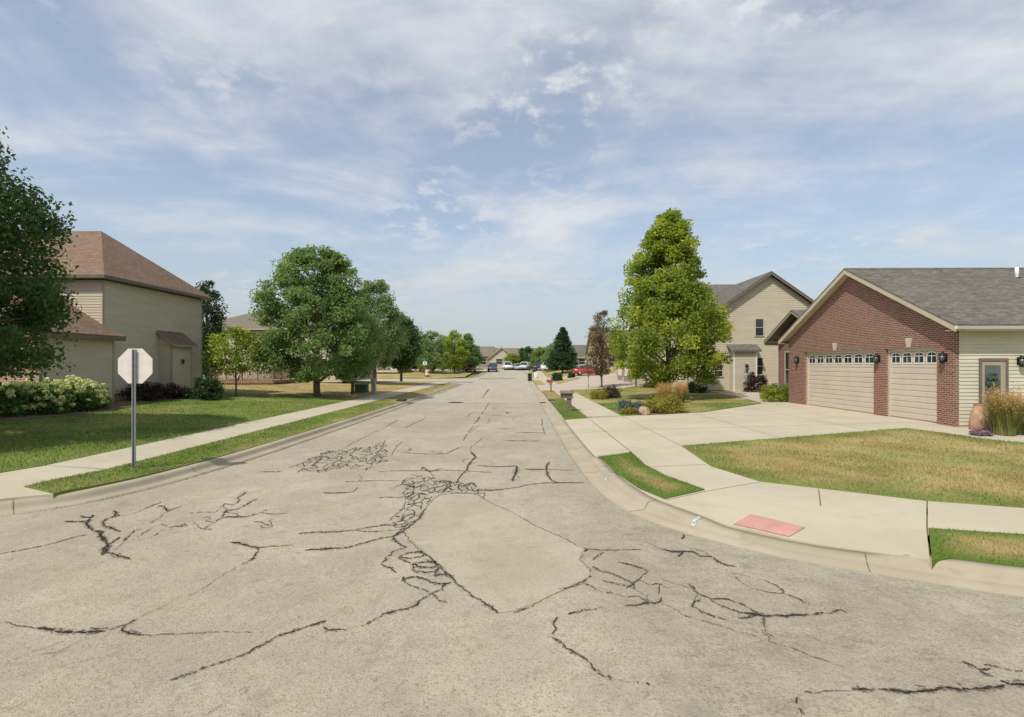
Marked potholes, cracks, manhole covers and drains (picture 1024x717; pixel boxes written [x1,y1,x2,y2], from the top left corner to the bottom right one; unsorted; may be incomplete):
crack [514,534,846,684]
crack [790,661,1024,714]
crack [5,491,283,595]
crack [262,390,584,626]
crack [4,603,346,680]
